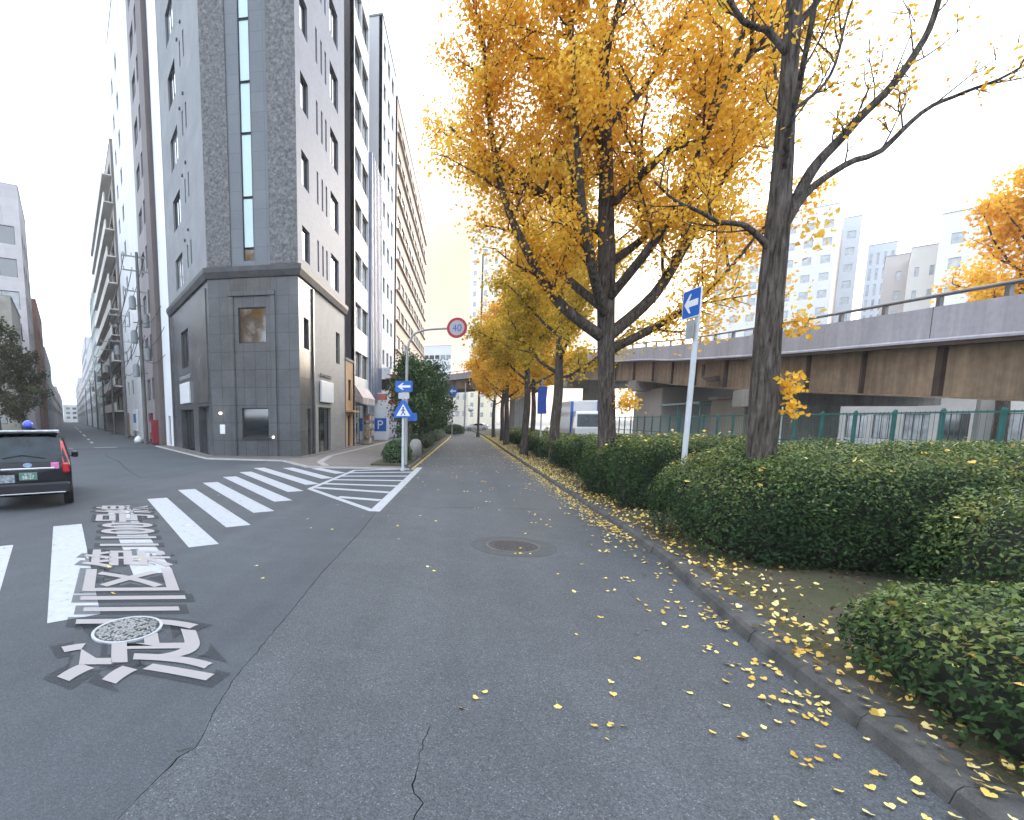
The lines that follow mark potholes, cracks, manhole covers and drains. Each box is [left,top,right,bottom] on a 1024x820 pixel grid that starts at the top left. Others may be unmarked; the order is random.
manhole cover [471,536,557,557]
crack [411,725,430,820]
manhole cover [91,616,163,644]
